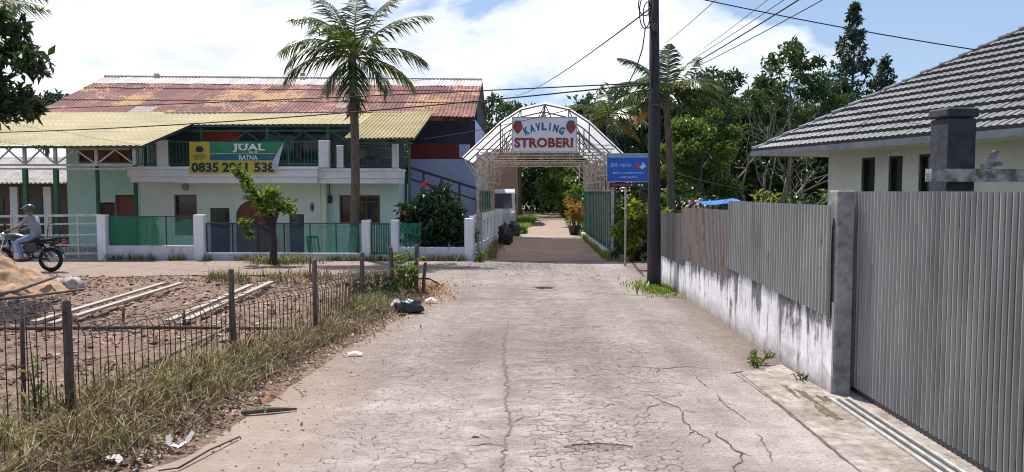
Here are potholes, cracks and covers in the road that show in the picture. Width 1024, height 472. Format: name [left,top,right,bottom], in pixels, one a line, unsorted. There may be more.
crack [282,297,772,472]
pothole [564,442,634,452]
